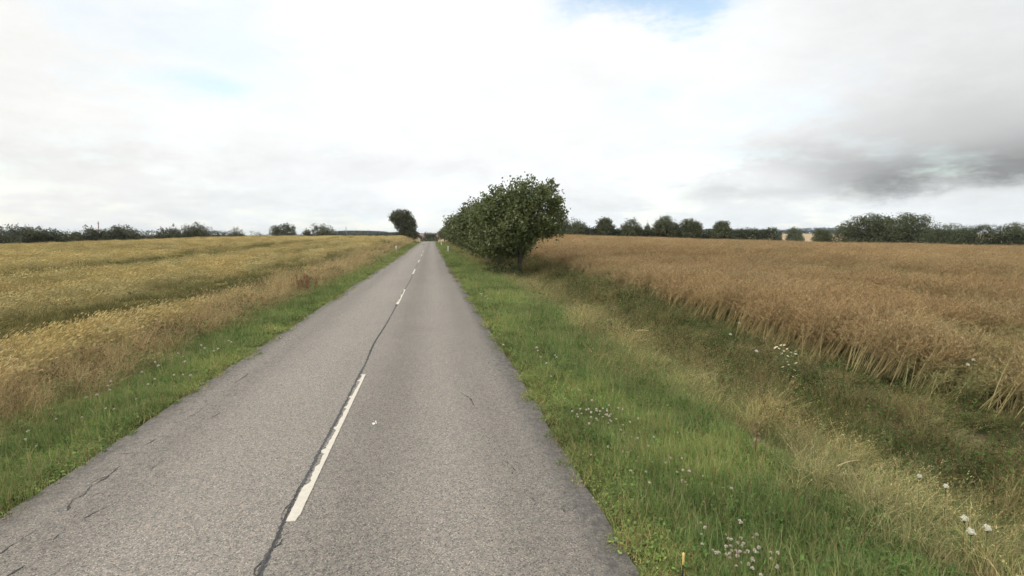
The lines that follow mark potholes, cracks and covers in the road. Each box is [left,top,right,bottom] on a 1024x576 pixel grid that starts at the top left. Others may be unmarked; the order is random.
crack [0,528,60,576]
crack [67,453,129,518]
